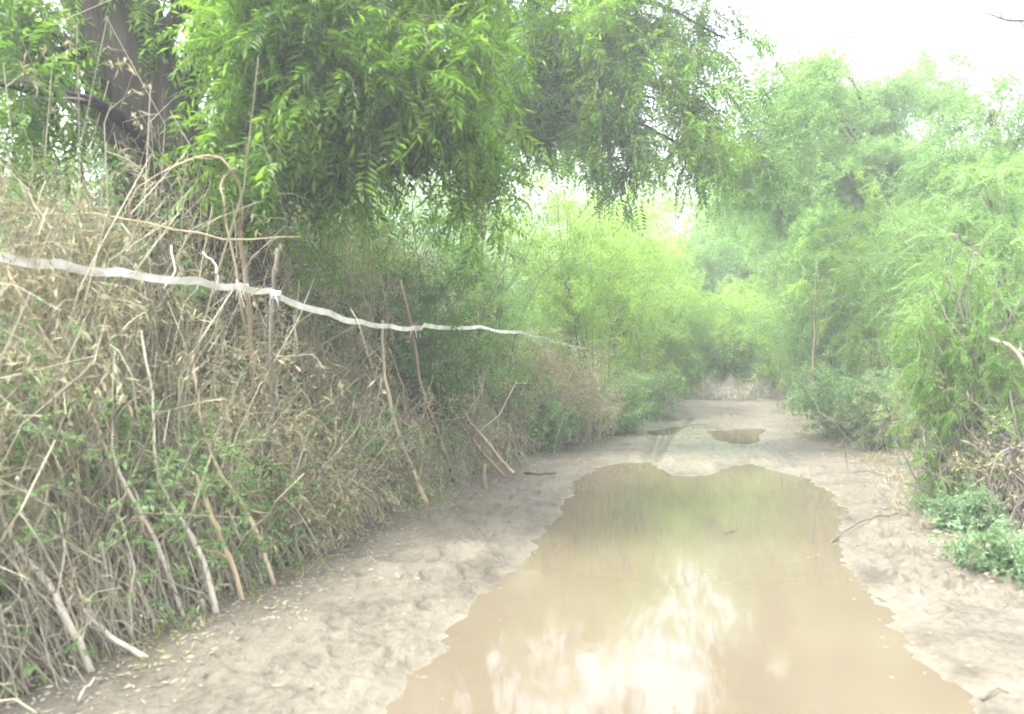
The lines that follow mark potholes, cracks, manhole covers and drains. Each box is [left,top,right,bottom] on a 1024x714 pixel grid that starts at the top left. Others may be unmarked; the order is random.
pothole [697,426,774,445]
pothole [640,424,688,438]
